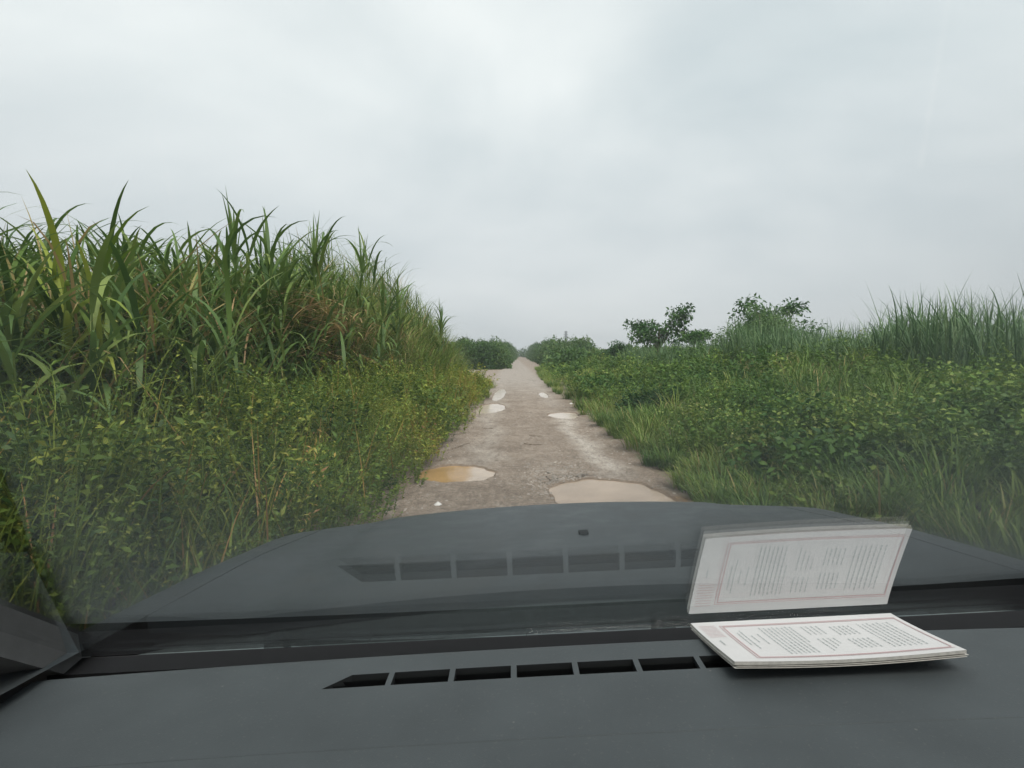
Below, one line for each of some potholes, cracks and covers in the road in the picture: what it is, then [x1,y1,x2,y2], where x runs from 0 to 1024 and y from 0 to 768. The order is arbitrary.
pothole [473,403,506,414]
pothole [545,477,683,504]
pothole [412,463,499,483]
pothole [491,388,506,401]
